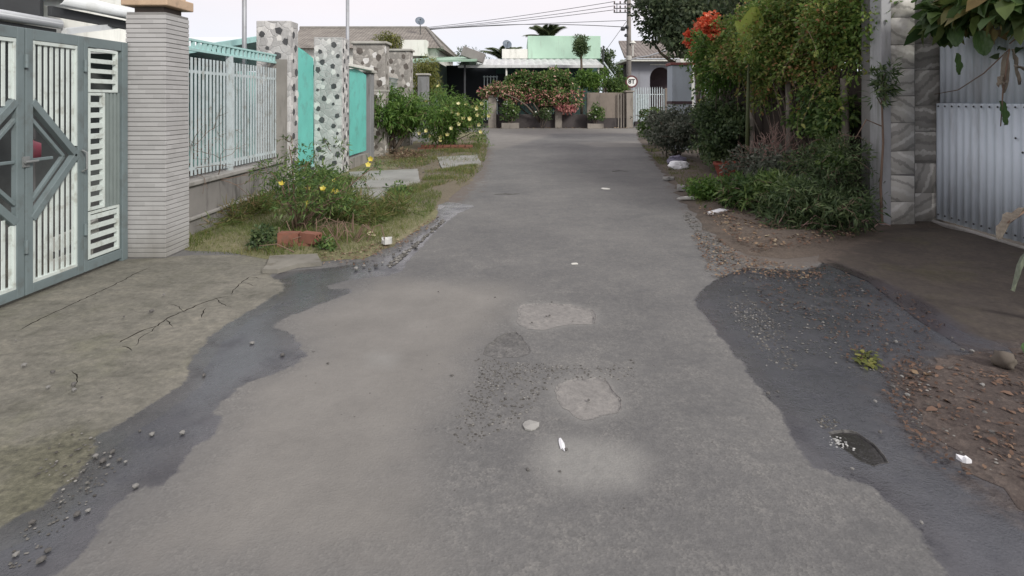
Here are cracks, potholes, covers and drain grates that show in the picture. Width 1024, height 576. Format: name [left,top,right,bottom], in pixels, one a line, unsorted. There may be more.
crack [120,277,257,350]
pothole [828,429,889,466]
crack [22,267,150,329]
